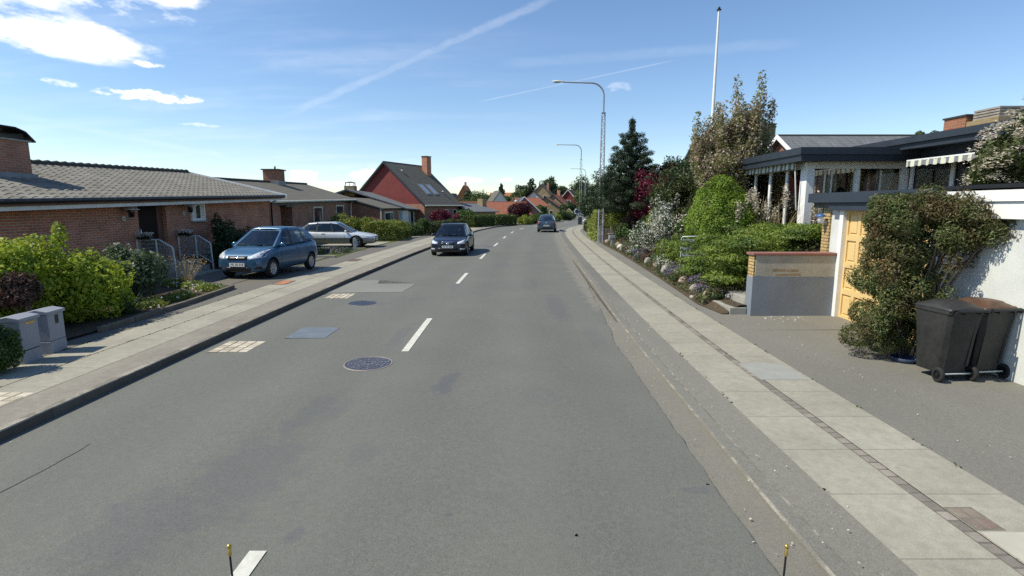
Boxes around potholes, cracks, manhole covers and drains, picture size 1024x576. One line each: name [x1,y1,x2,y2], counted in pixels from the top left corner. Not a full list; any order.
crack [0,443,91,493]
manhole cover [343,356,393,371]
manhole cover [285,327,340,339]
